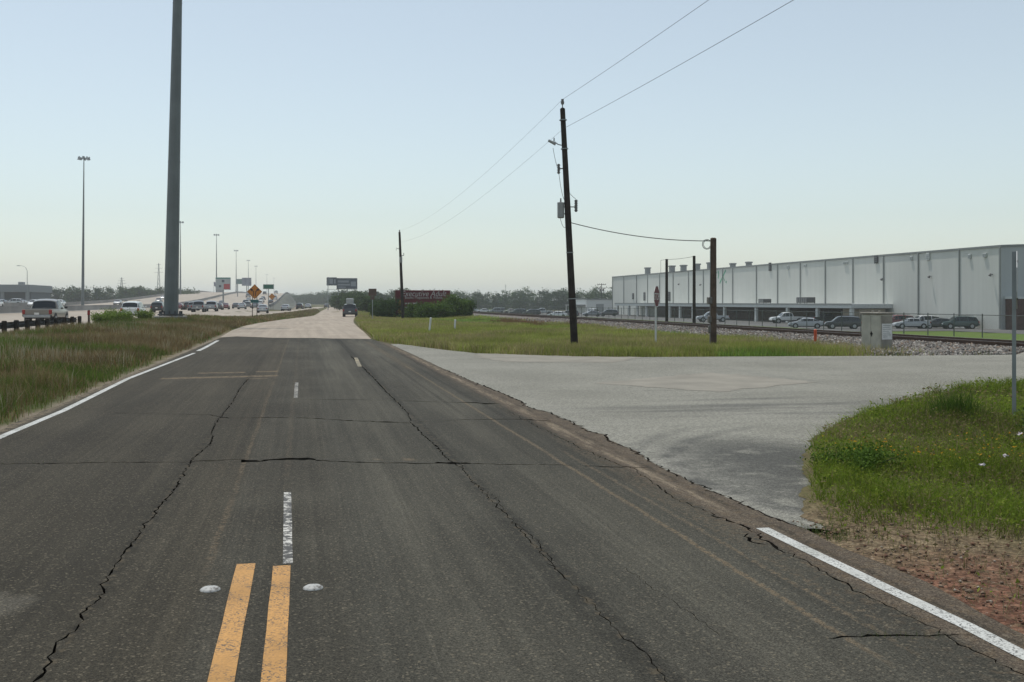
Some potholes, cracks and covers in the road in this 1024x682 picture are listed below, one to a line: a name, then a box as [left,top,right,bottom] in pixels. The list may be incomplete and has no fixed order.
crack [27,357,1024,682]
